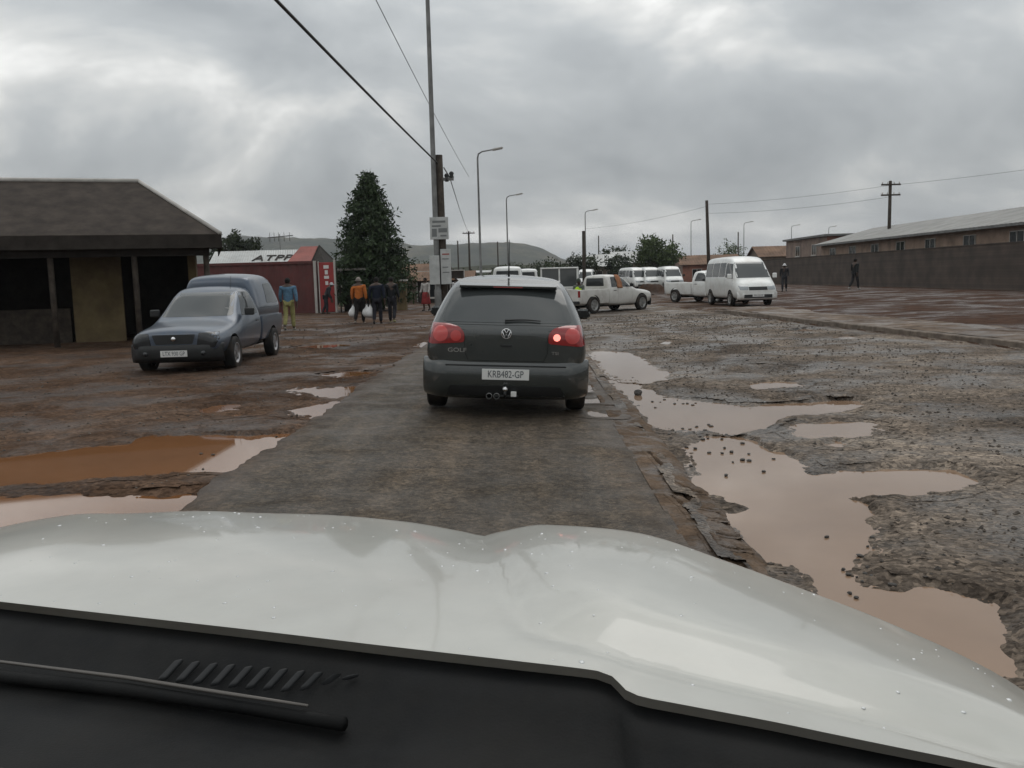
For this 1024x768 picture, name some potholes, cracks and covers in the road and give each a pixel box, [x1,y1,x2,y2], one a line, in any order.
pothole [0,481,210,527]
pothole [595,375,894,438]
pothole [656,432,1024,690]
pothole [273,382,366,401]
pothole [586,349,688,385]
pothole [0,423,306,492]
pothole [263,397,344,420]
pothole [588,382,614,393]
crack [641,450,755,565]
